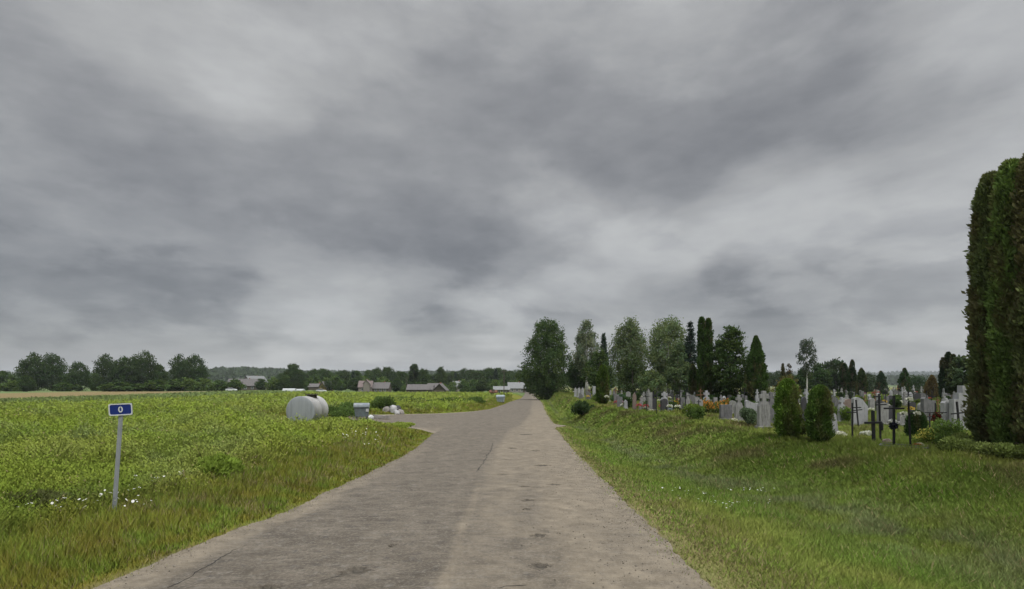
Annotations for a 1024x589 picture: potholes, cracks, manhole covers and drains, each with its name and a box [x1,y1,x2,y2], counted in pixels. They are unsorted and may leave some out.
pothole [526,562,553,571]
